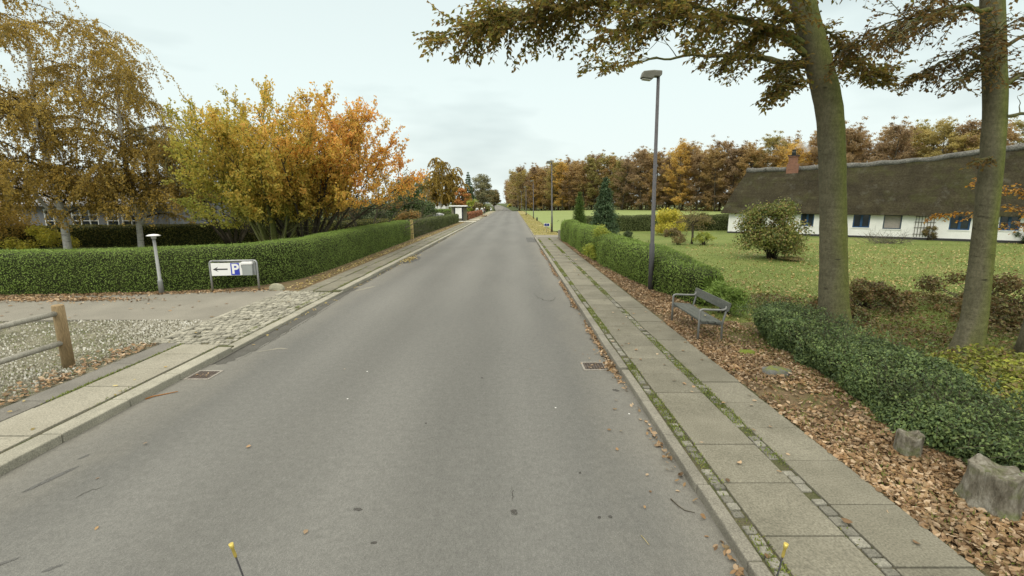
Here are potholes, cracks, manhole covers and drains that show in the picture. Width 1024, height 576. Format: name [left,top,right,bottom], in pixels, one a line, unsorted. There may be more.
drain grate [580,362,608,371]
drain grate [183,370,224,380]
